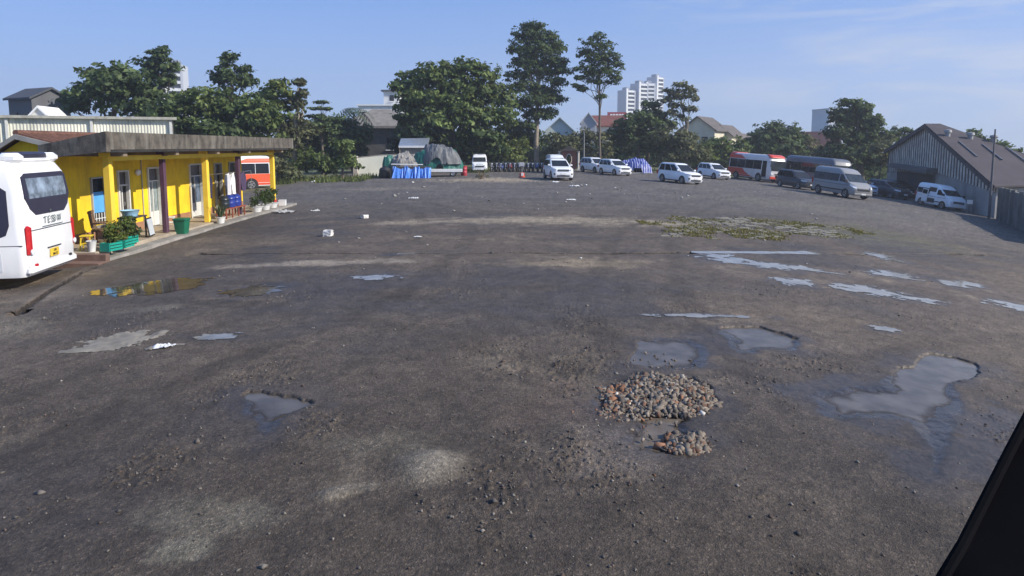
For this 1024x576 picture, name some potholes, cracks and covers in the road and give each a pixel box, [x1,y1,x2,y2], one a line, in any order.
pothole [227,385,322,444]
pothole [618,333,724,378]
pothole [573,366,735,469]
pothole [707,323,815,358]
